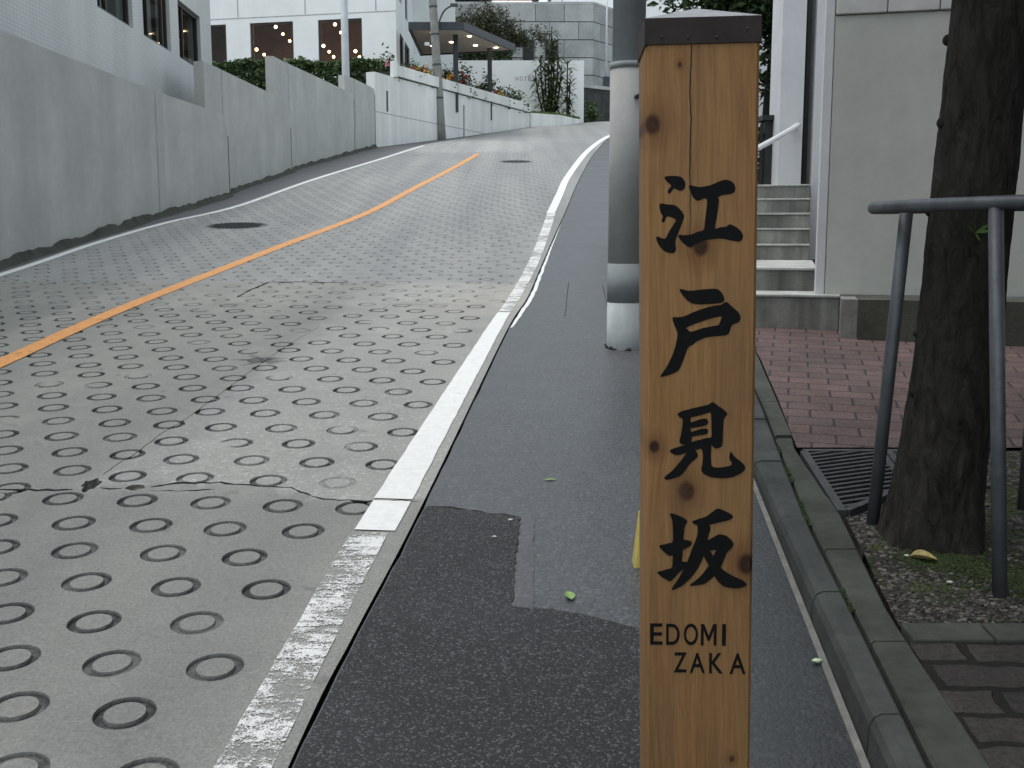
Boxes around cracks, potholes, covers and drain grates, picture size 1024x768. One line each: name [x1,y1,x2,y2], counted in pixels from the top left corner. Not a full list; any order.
crack [236,282,348,298]
crack [0,329,419,505]
